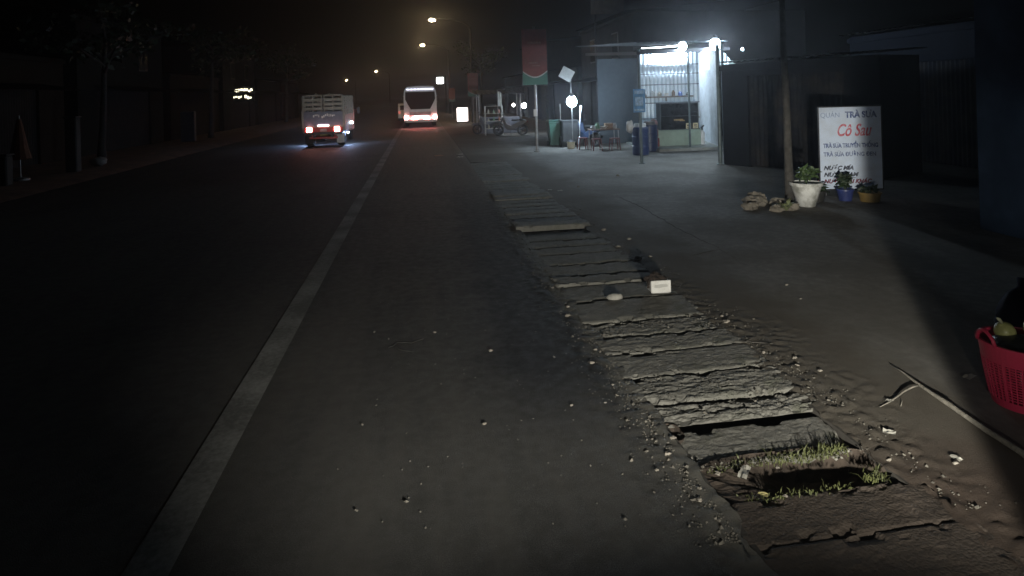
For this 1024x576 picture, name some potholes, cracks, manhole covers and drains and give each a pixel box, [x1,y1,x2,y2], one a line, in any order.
pothole [699,447,892,502]
crack [626,200,748,266]
